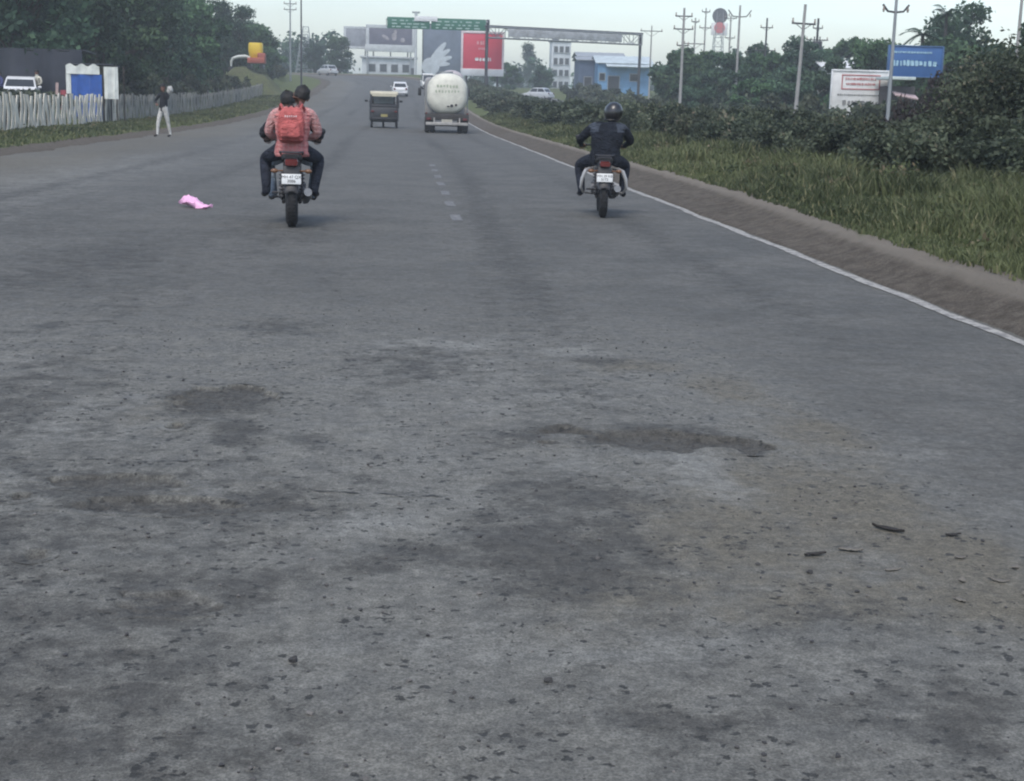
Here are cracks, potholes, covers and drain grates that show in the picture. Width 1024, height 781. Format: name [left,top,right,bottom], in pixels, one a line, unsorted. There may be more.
pothole [95,585,243,621]
pothole [0,471,214,494]
pothole [150,383,287,412]
pothole [523,423,813,458]
